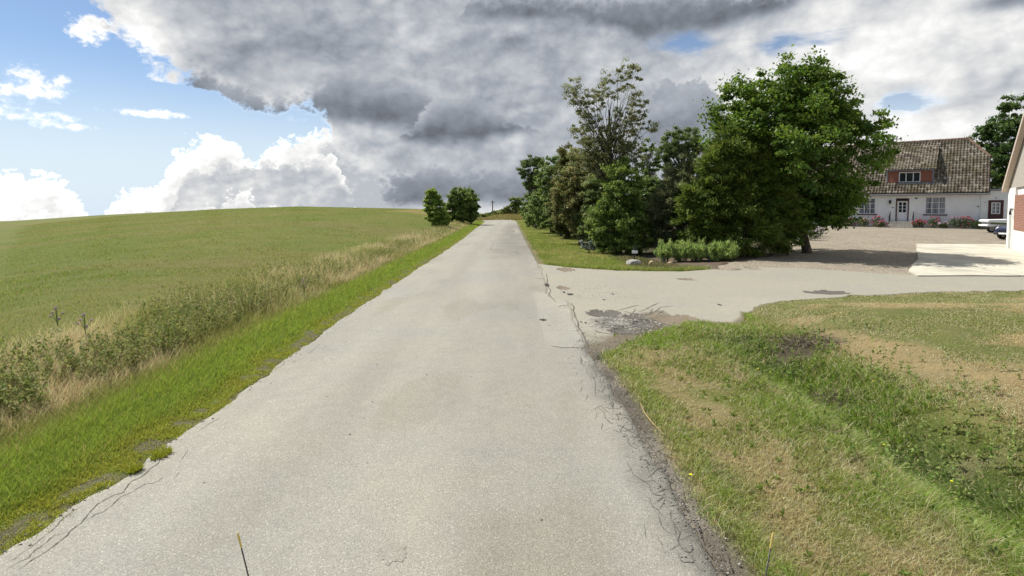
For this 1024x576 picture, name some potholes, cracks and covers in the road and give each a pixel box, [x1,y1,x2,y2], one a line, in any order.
pothole [586,309,623,317]
crack [6,458,177,567]
crack [573,303,730,571]
